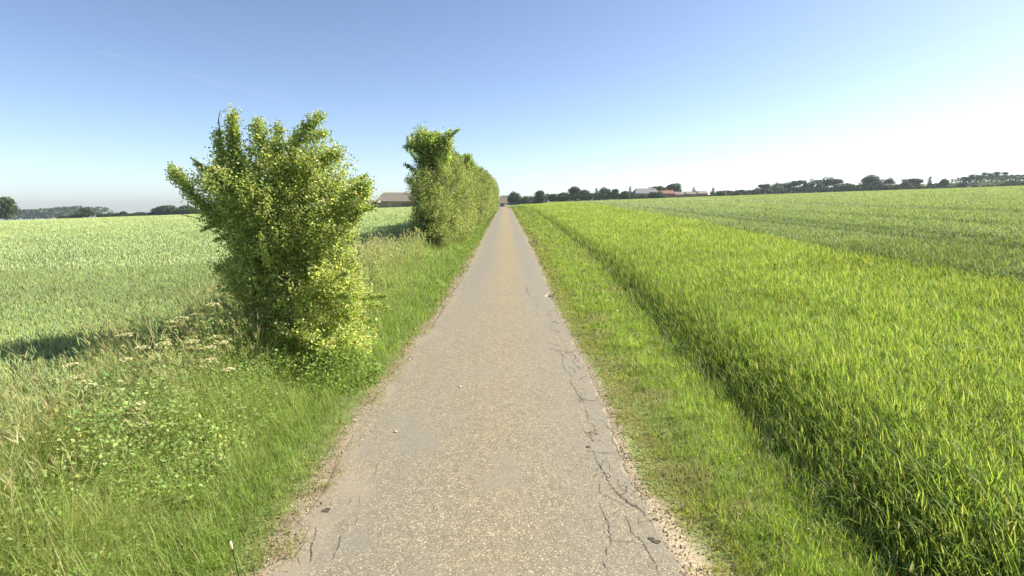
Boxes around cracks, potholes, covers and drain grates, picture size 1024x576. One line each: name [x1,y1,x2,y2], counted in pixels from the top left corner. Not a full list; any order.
crack [528,292,659,574]
